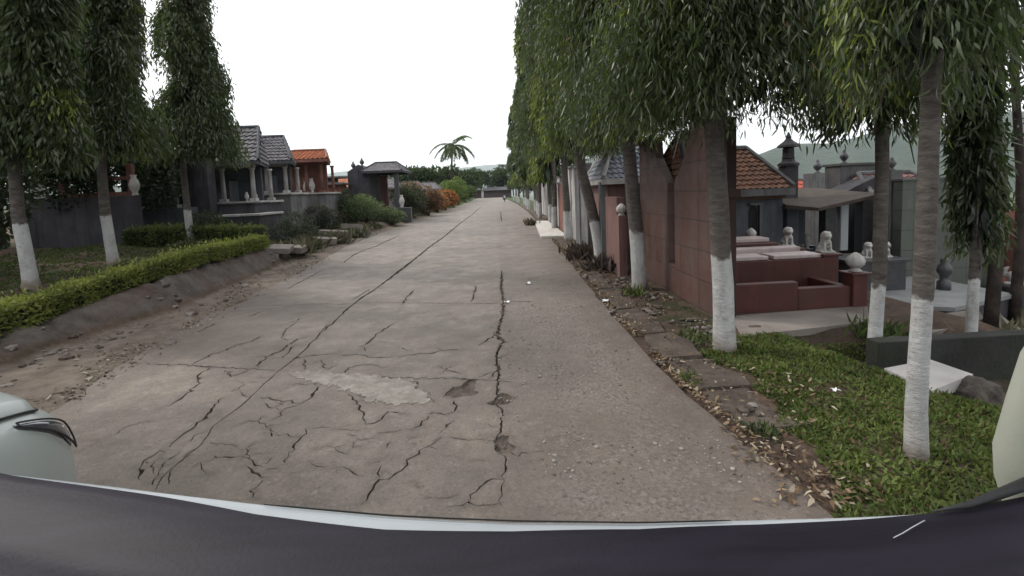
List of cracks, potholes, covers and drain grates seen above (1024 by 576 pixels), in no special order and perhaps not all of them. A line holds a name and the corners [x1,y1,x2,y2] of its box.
pothole [487,393,515,407]
pothole [493,435,516,454]
crack [114,286,530,507]
crack [286,236,398,290]
pothole [444,379,479,398]
